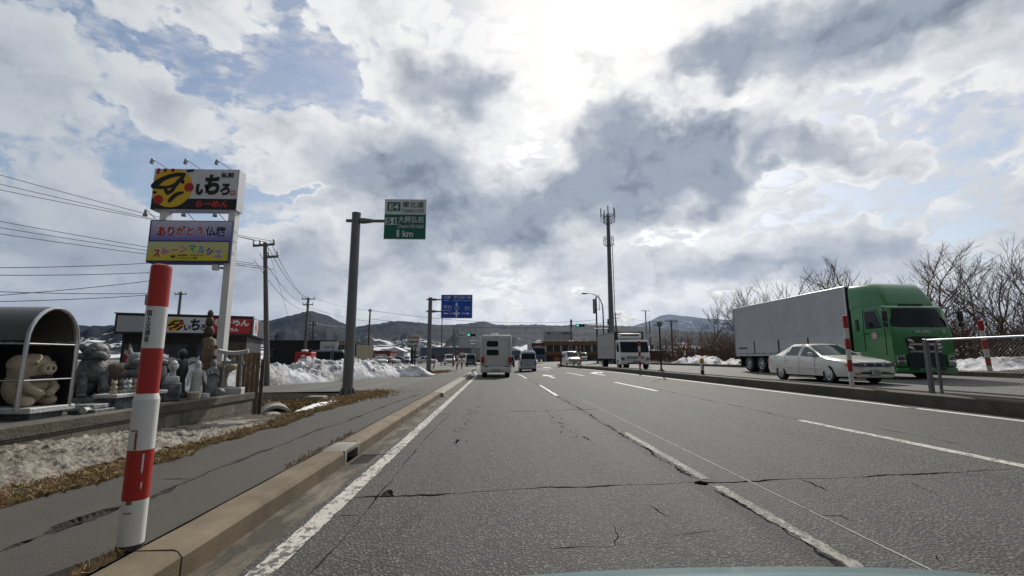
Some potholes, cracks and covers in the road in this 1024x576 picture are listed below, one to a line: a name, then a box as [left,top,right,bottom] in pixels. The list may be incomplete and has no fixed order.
drain grate [322,442,378,465]
crack [312,406,1007,572]
